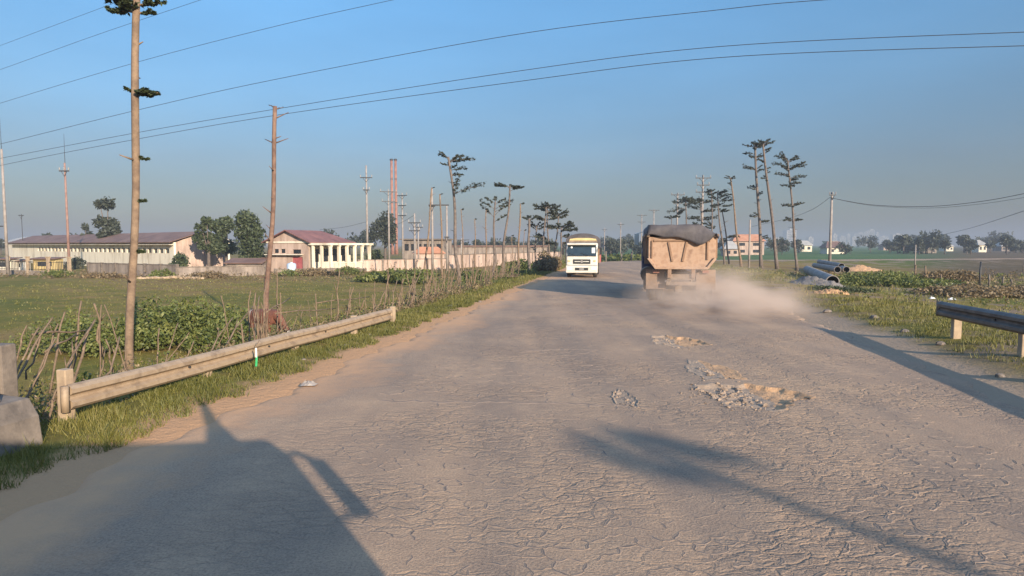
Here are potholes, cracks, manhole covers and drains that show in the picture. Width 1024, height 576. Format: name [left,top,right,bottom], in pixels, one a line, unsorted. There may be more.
pothole [611,389,639,408]
pothole [684,360,747,380]
pothole [650,335,713,349]
pothole [680,377,816,413]
